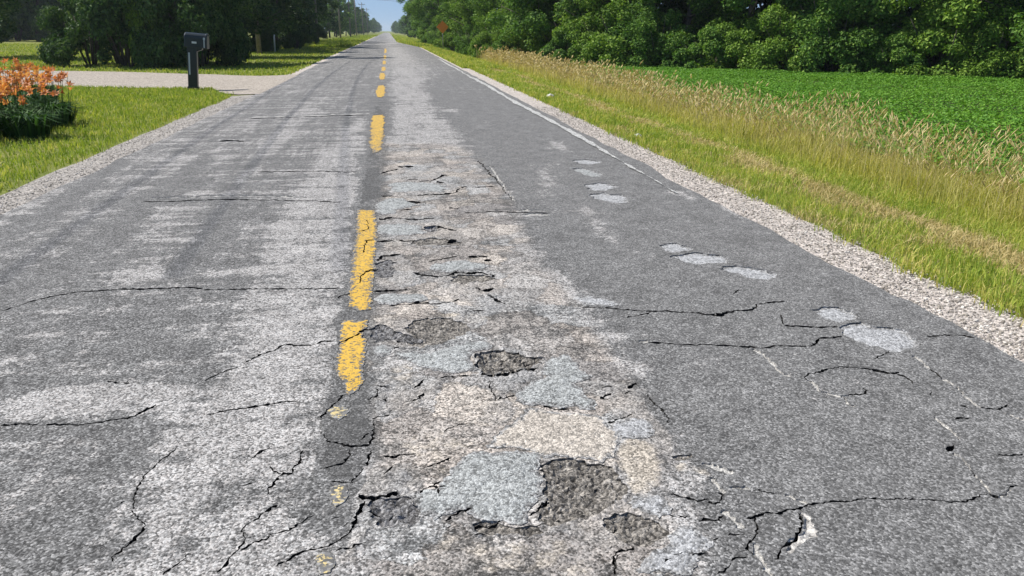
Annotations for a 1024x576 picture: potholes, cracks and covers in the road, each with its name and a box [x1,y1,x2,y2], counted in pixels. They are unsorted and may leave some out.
pothole [404,317,470,348]
crack [197,385,501,573]
pothole [538,458,628,527]
crack [584,290,1024,576]
crack [2,166,548,311]
crack [0,405,156,426]
pothole [473,350,543,376]
crack [111,447,177,562]
pothole [602,512,670,547]
crack [205,329,369,381]
pothole [367,496,419,527]
crack [406,367,538,402]
